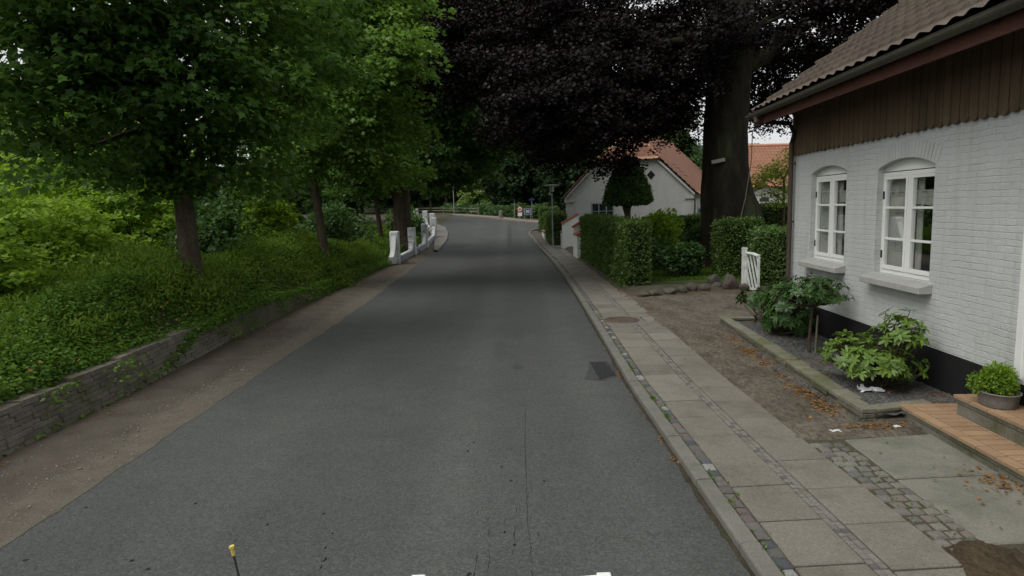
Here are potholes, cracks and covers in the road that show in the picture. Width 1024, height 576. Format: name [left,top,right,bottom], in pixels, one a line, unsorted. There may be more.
crack [473,414,539,576]
